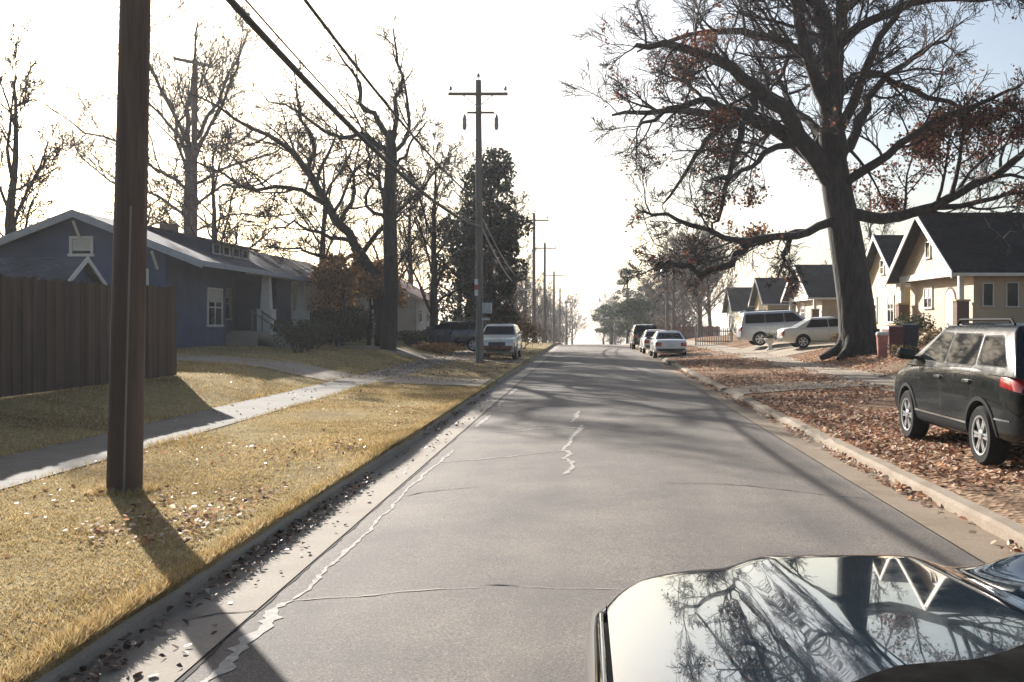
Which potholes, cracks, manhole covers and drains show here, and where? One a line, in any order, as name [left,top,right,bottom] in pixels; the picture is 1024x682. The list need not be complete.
crack [173,349,609,682]
